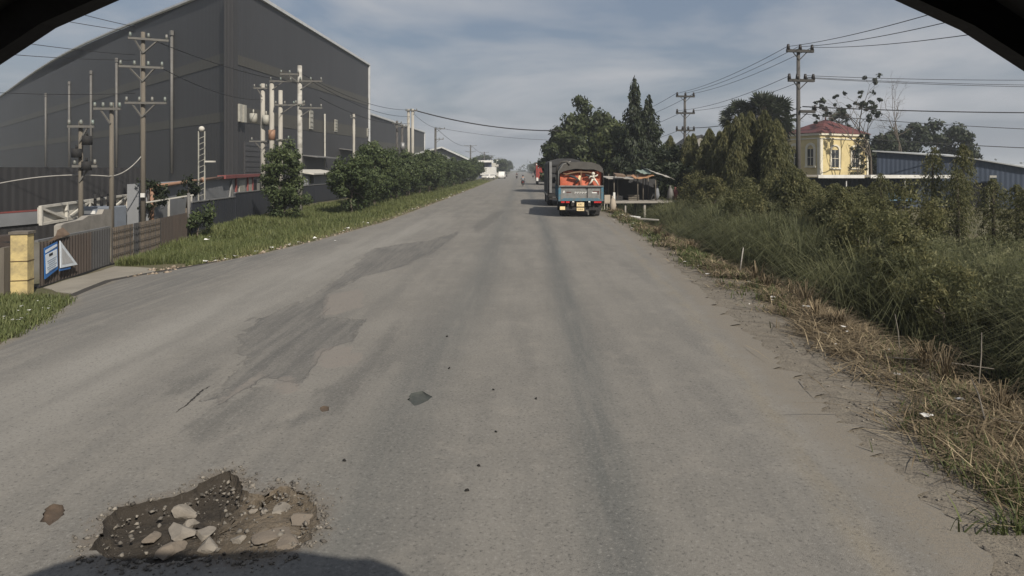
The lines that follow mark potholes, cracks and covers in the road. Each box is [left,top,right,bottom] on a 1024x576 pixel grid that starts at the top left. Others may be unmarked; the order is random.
pothole [40,504,65,526]
pothole [407,391,432,406]
pothole [89,471,320,564]
